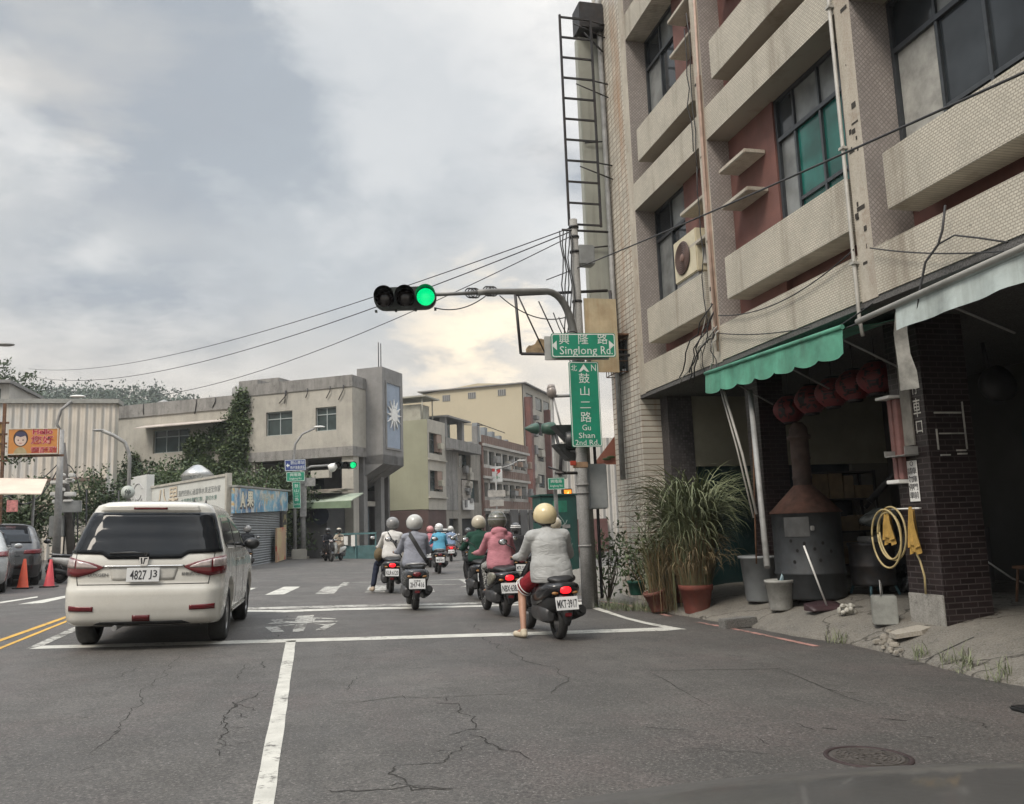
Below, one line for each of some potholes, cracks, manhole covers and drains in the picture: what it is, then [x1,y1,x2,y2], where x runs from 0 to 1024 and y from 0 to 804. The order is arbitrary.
crack [215,661,266,756]
manhole cover [823,746,915,767]
crack [329,666,531,792]
crack [474,624,569,696]
